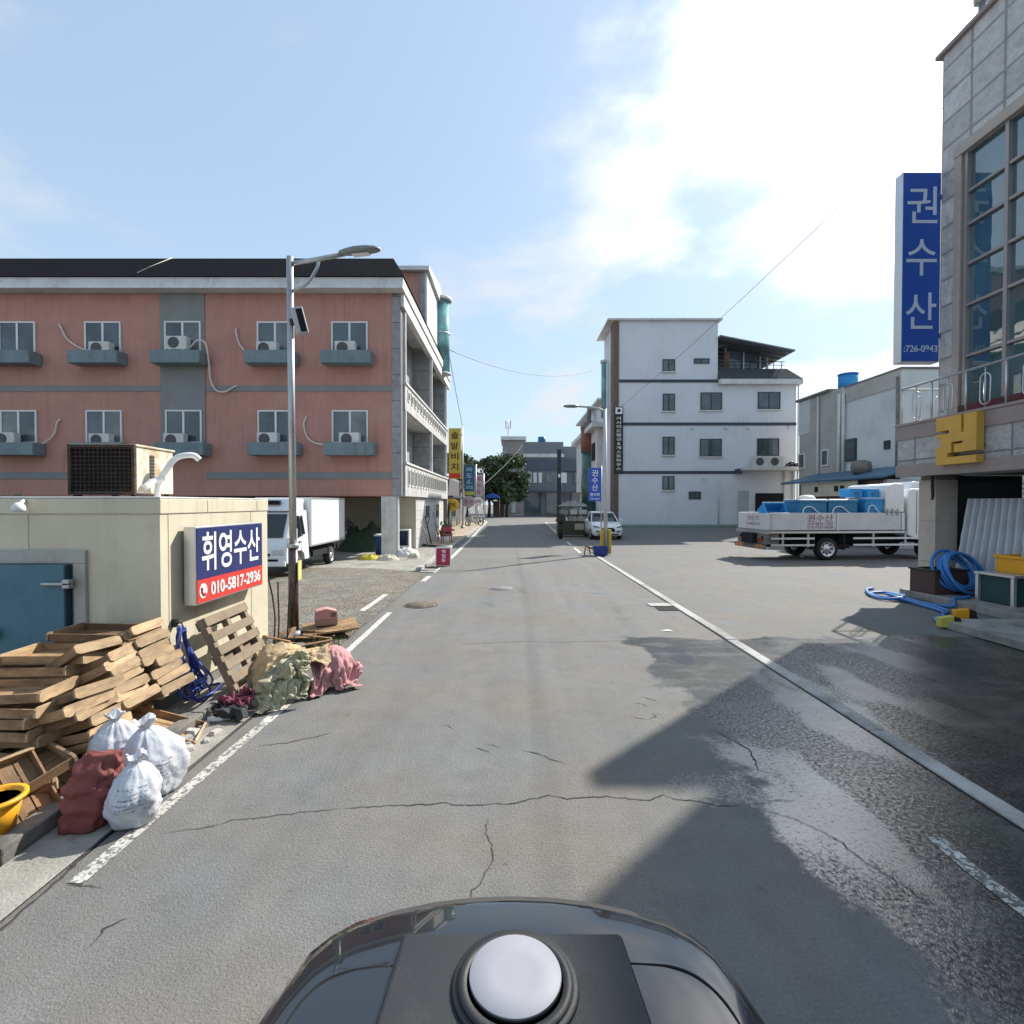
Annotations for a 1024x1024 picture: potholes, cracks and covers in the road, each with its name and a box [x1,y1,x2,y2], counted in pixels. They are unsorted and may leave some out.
crack [162,794,938,907]
